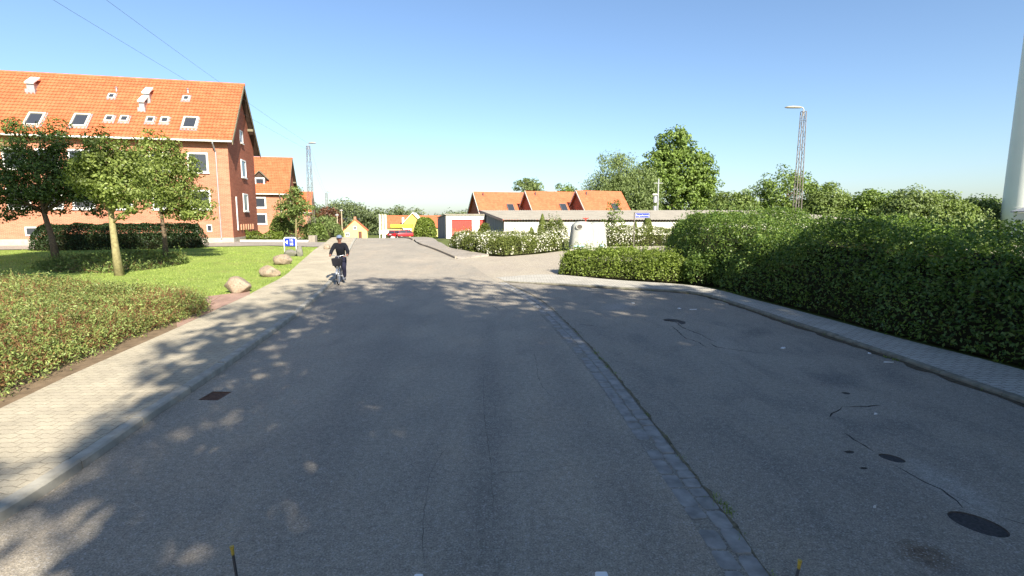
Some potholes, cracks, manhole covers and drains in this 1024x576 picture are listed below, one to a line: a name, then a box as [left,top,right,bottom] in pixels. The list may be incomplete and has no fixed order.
crack [666,320,758,353]
crack [893,464,971,508]
drain grate [199,392,231,401]
